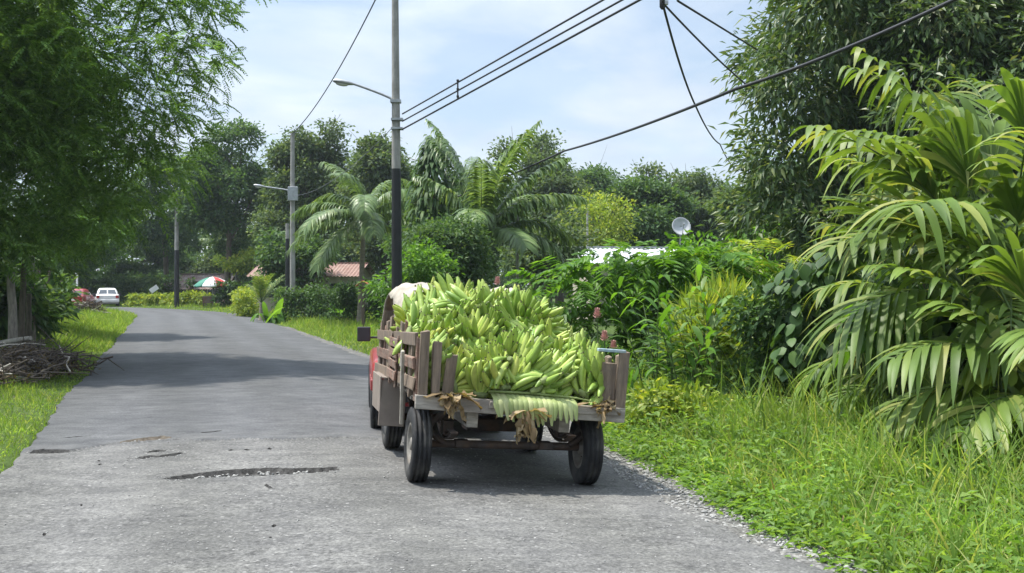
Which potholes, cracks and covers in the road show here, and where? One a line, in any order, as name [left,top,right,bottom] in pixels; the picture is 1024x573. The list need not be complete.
pothole [163,467,339,480]
